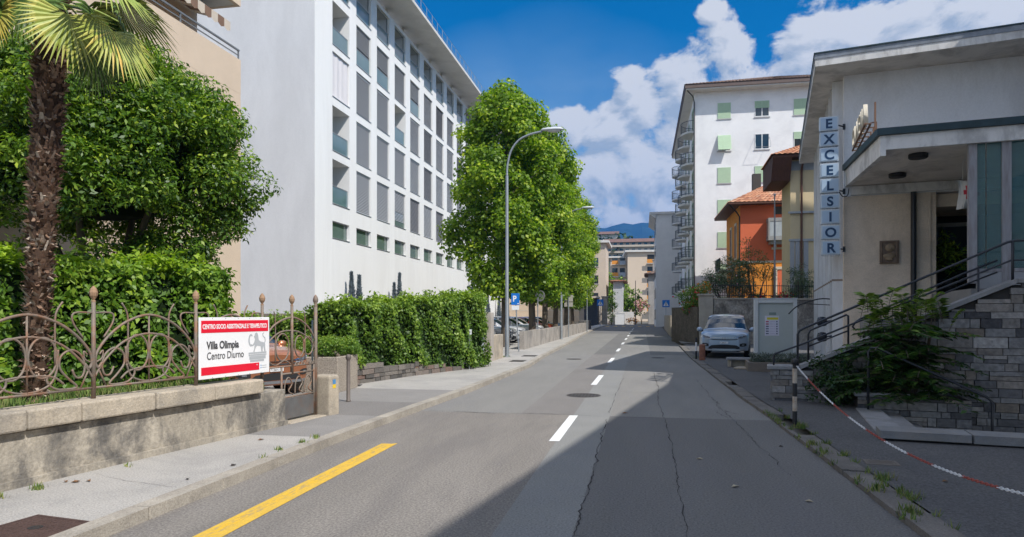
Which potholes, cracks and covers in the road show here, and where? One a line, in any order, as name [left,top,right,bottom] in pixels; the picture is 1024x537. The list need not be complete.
crack [641,376,688,536]
crack [572,378,624,537]
